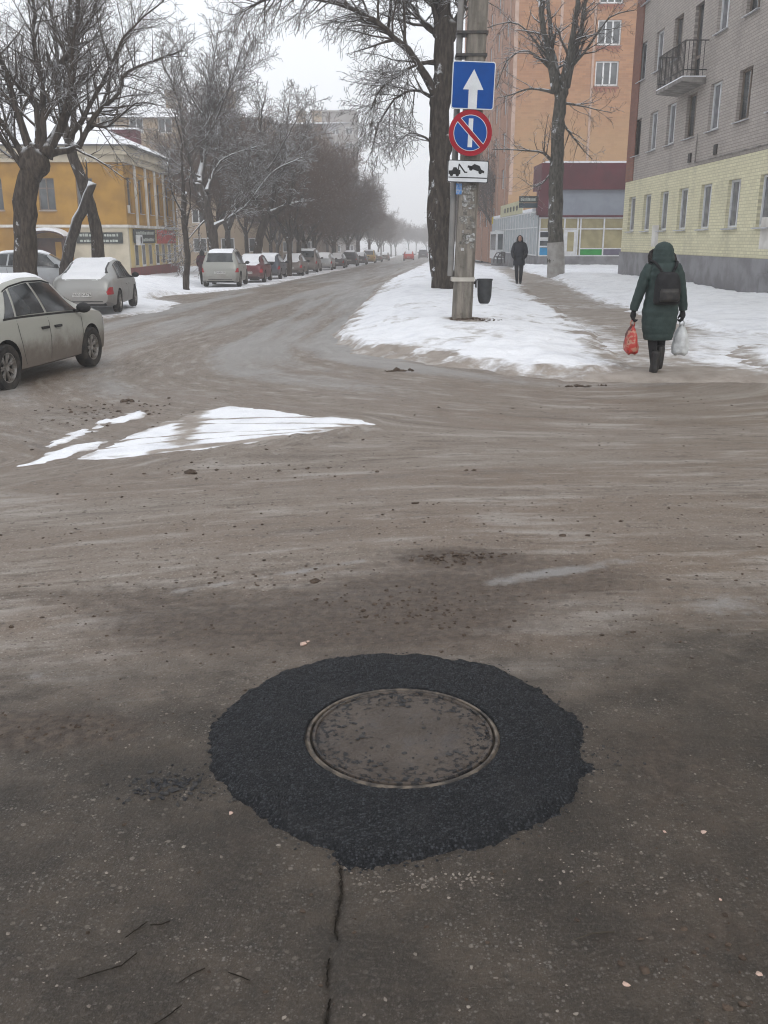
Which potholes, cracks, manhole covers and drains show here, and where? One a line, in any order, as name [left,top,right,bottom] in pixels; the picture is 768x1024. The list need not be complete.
crack [77,921,250,1024]
manhole cover [305,689,500,789]
crack [324,866,343,1024]
